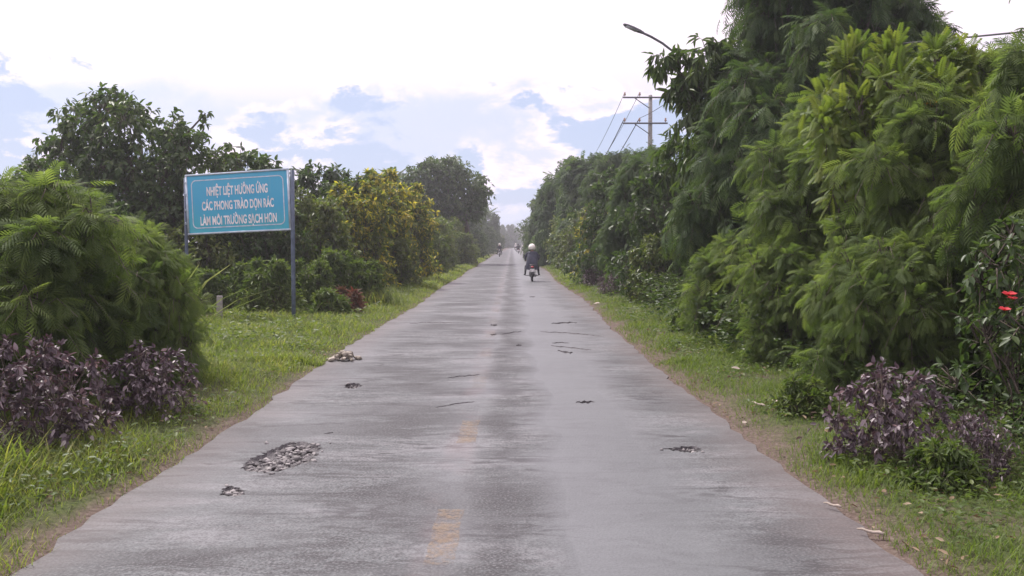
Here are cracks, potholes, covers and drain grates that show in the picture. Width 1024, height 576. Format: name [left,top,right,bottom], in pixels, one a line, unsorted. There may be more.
pothole [240,441,331,474]
crack [548,332,603,350]
pothole [220,484,245,496]
